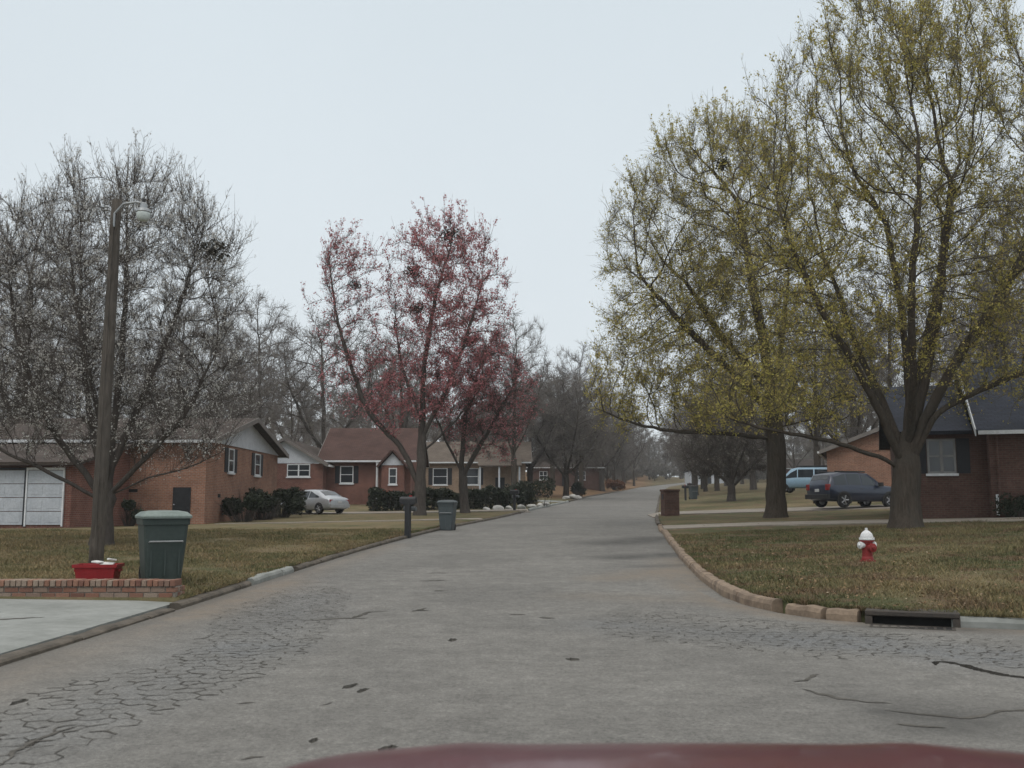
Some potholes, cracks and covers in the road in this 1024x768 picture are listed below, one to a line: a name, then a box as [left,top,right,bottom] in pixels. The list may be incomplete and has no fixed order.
drain grate [865,607,961,631]
crack [0,586,383,768]
crack [797,674,1024,728]
crack [595,610,1024,678]
